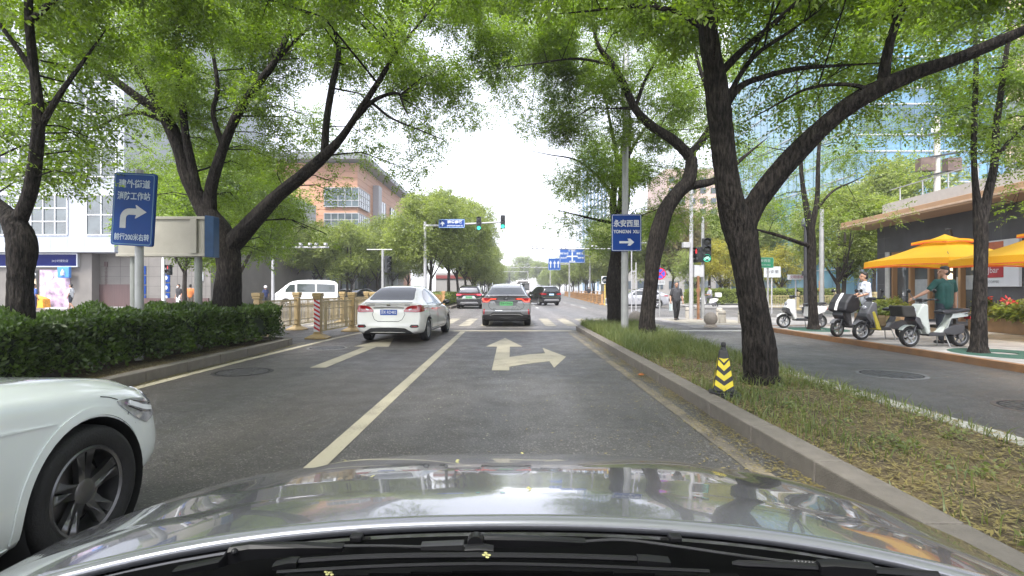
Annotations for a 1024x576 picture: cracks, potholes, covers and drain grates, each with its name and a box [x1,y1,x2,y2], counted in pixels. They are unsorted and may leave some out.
manhole cover [855,369,930,380]
manhole cover [210,368,274,377]
manhole cover [990,399,1024,412]
